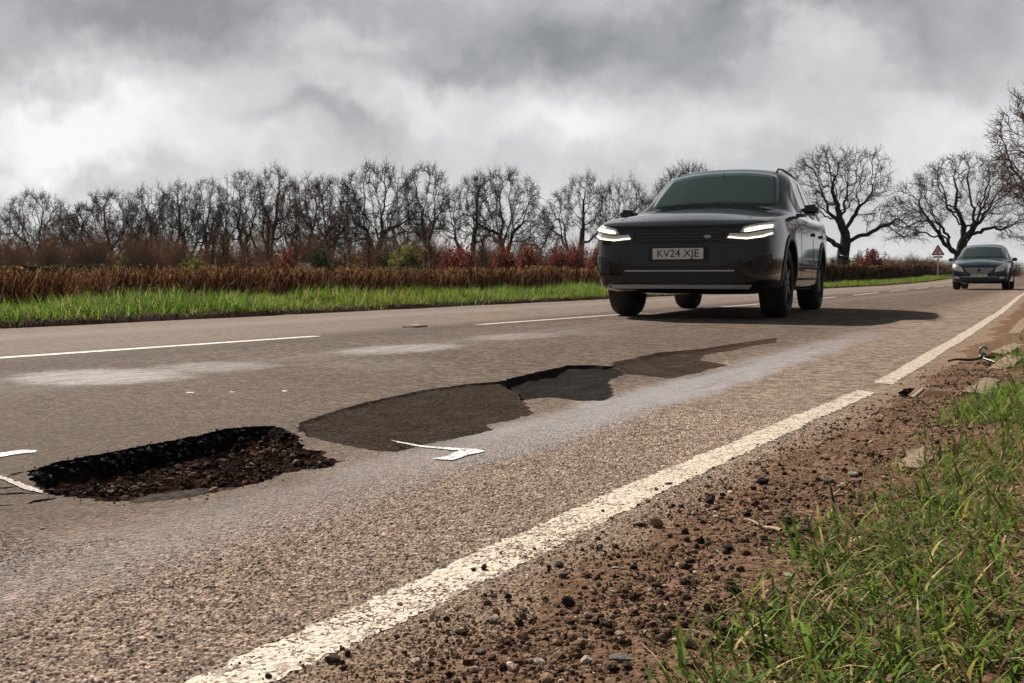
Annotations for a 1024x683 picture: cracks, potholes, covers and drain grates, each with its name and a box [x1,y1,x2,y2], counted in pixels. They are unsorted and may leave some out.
pothole [15,425,346,506]
pothole [499,365,624,402]
